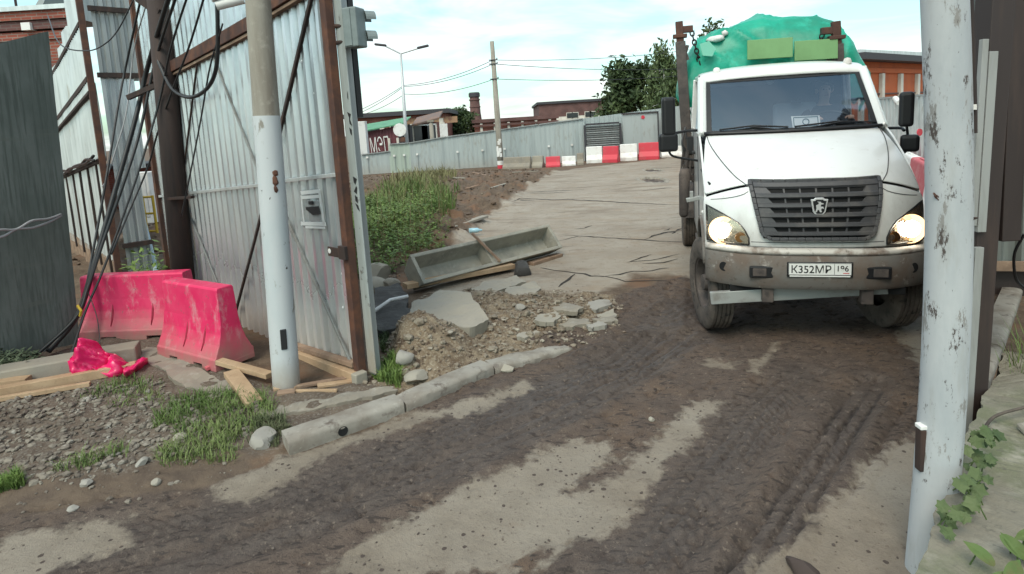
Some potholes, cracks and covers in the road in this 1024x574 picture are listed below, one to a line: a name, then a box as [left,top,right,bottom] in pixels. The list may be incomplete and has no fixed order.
crack [544,225,682,287]
crack [515,187,677,205]
